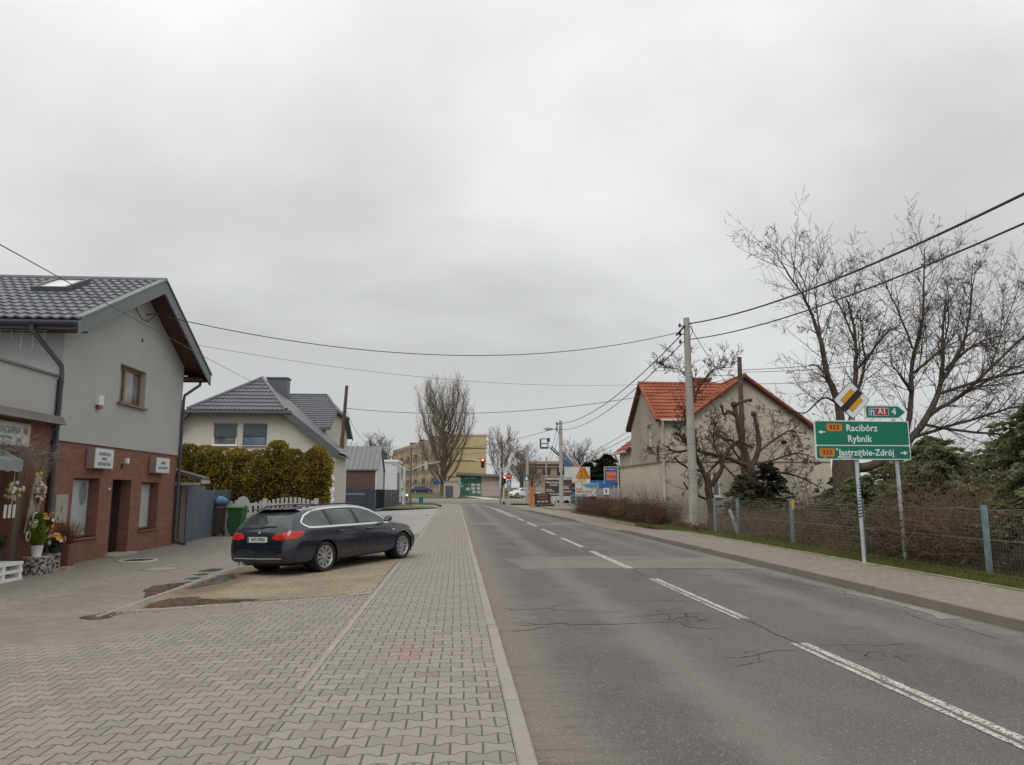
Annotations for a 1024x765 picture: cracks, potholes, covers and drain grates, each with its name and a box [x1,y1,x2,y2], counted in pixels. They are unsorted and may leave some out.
crack [513,600,730,631]
